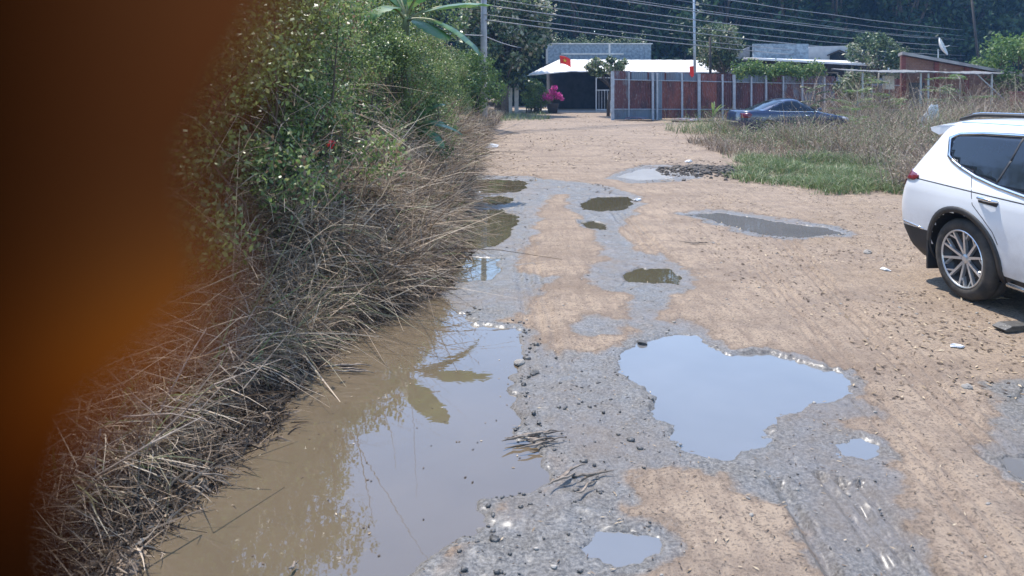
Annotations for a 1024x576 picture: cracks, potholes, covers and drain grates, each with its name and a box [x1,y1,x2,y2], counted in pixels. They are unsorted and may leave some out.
pothole [822,435,886,462]
pothole [448,255,504,283]
pothole [615,332,860,462]
pothole [618,266,684,285]
pothole [474,178,529,194]
pothole [615,168,674,181]
pothole [579,219,610,230]
pothole [578,523,671,570]
pothole [993,452,1024,482]
pothole [683,212,846,238]
pothole [579,196,636,212]
pothole [118,295,552,576]
